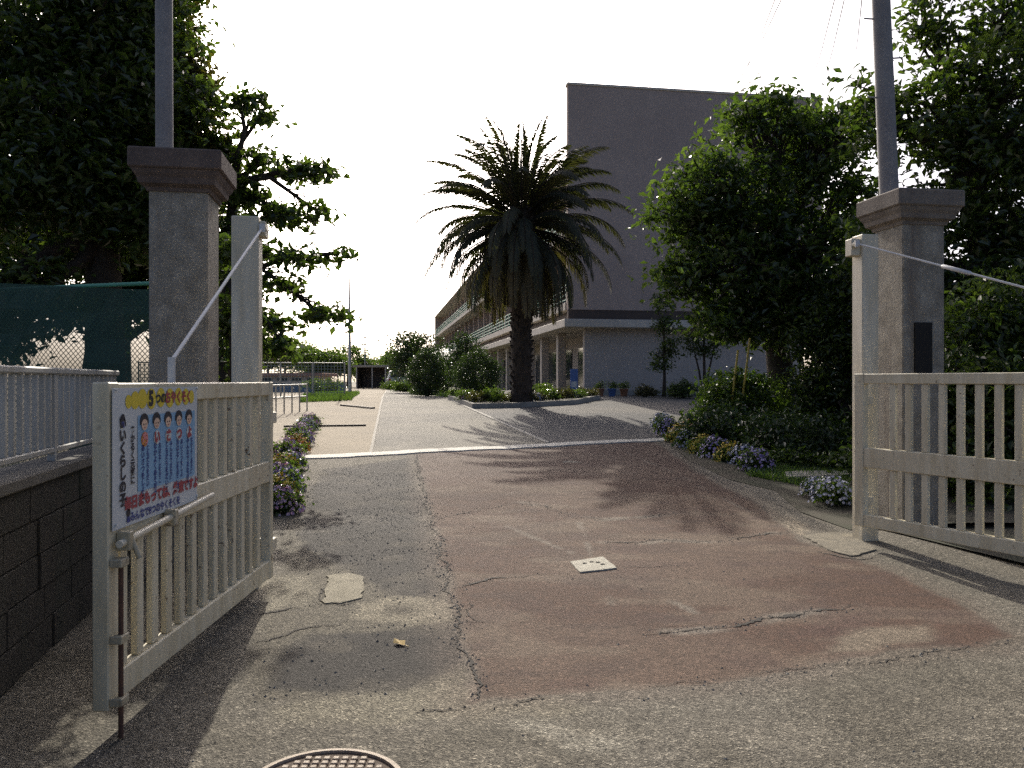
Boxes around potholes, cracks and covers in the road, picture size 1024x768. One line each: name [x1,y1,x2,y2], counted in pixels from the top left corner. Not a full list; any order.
crack [252,588,363,643]
manhole cover [570,556,617,573]
crack [454,572,568,623]
crack [642,604,854,637]
manhole cover [263,748,400,768]
